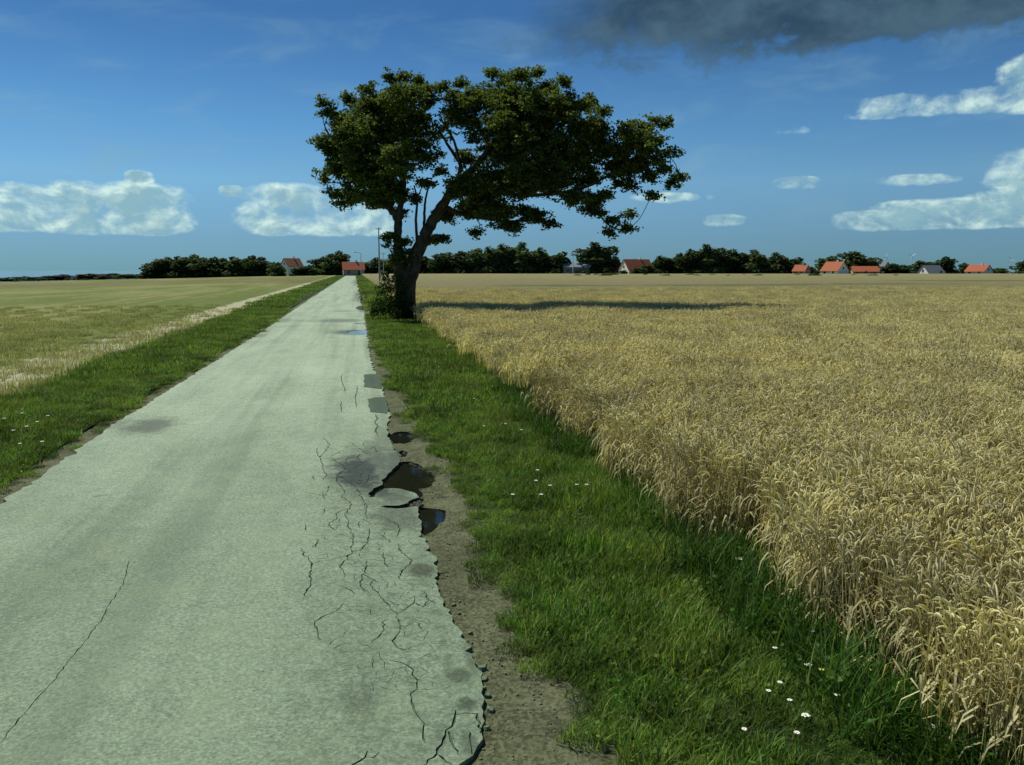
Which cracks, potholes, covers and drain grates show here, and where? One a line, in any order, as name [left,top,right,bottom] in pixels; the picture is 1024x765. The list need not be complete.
pothole [418,507,446,535]
crack [290,439,481,765]
pothole [369,462,435,498]
pothole [387,432,417,444]
crack [2,562,130,741]
